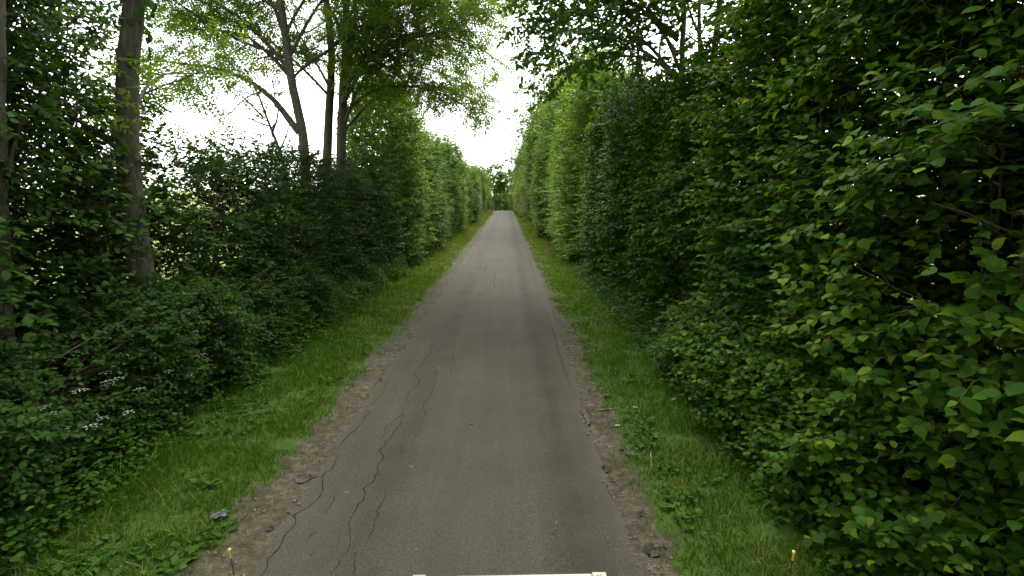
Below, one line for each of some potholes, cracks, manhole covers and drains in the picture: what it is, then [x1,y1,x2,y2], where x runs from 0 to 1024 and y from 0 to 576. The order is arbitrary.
crack [261,324,455,576]
